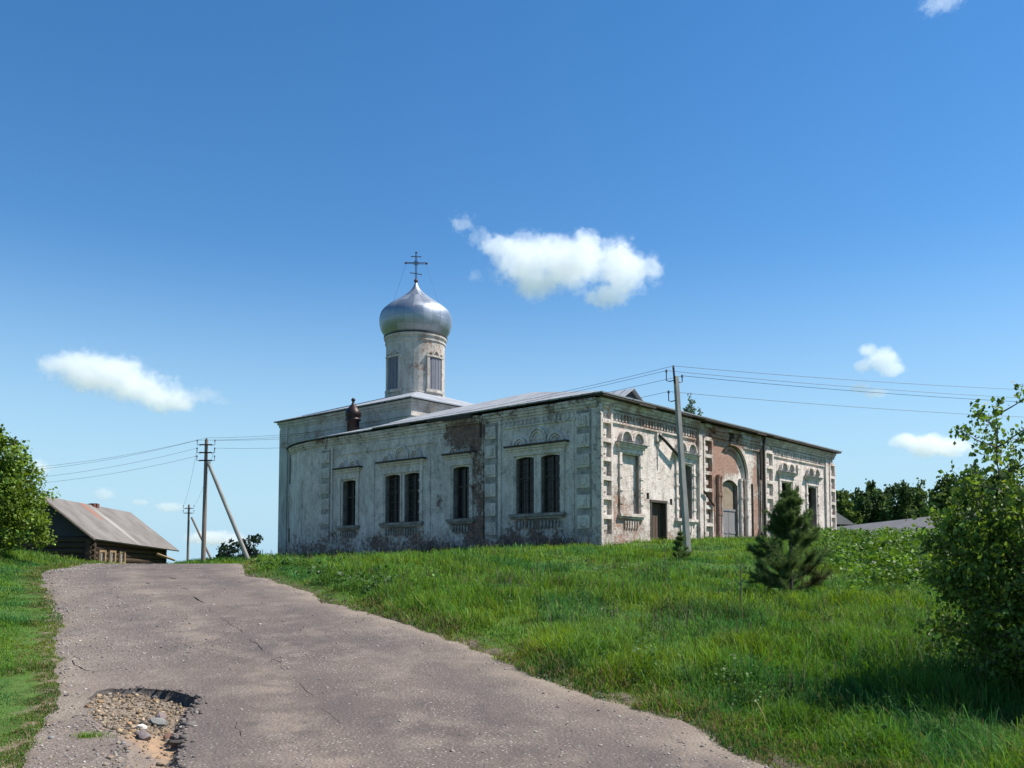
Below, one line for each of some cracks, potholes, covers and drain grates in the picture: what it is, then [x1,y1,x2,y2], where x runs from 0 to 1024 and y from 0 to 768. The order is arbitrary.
pothole [22,685,208,768]
